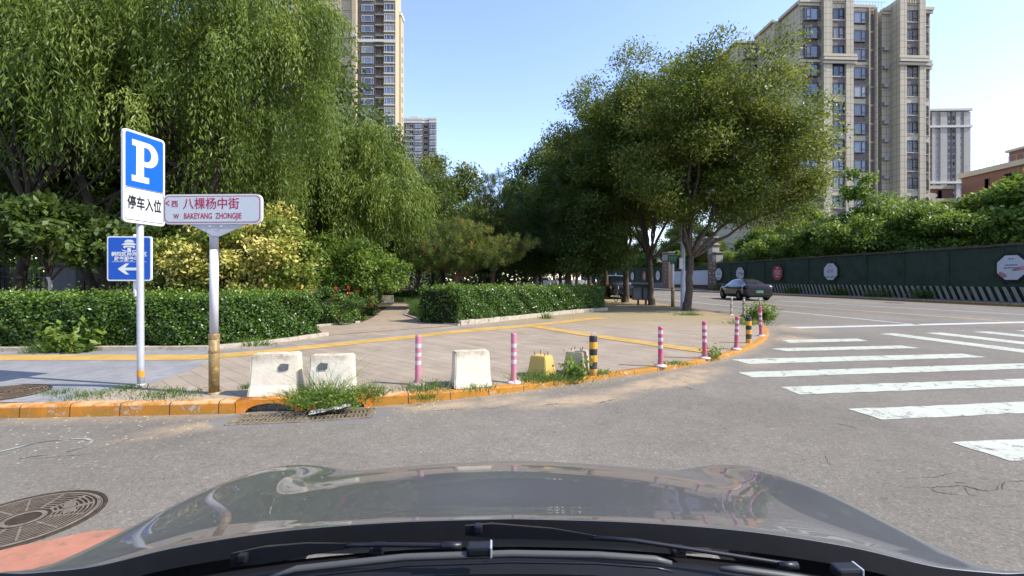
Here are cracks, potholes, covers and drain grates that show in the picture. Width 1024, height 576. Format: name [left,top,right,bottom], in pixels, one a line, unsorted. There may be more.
manhole cover [0,490,108,550]
drain grate [300,407,376,423]
manhole cover [0,384,53,401]
crack [895,472,1023,496]
